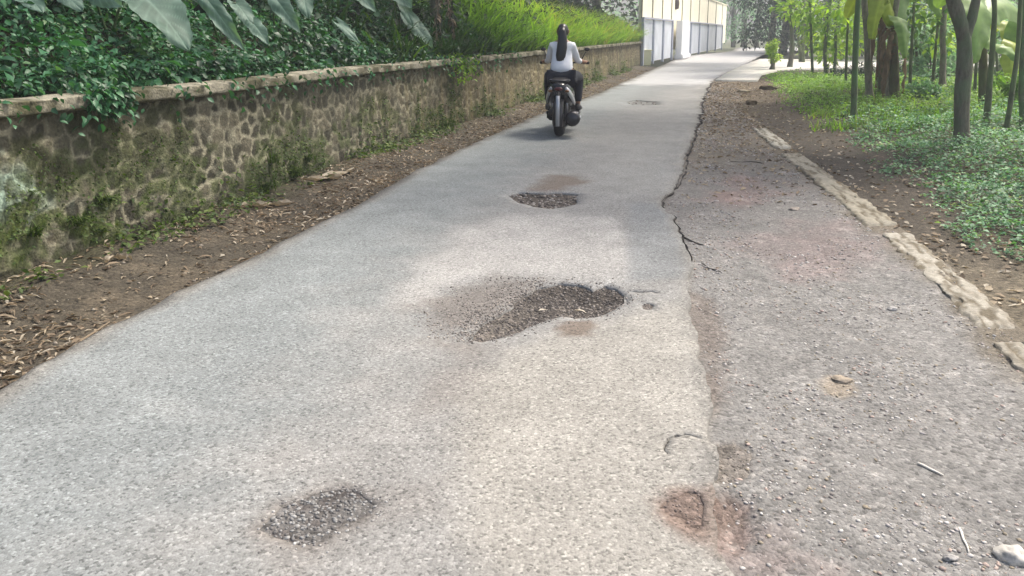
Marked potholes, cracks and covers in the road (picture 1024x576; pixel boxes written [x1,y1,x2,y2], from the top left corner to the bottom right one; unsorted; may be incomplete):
pothole [232,482,403,562]
pothole [413,276,646,346]
crack [661,82,721,273]
pothole [510,192,577,209]
pothole [659,490,723,536]
